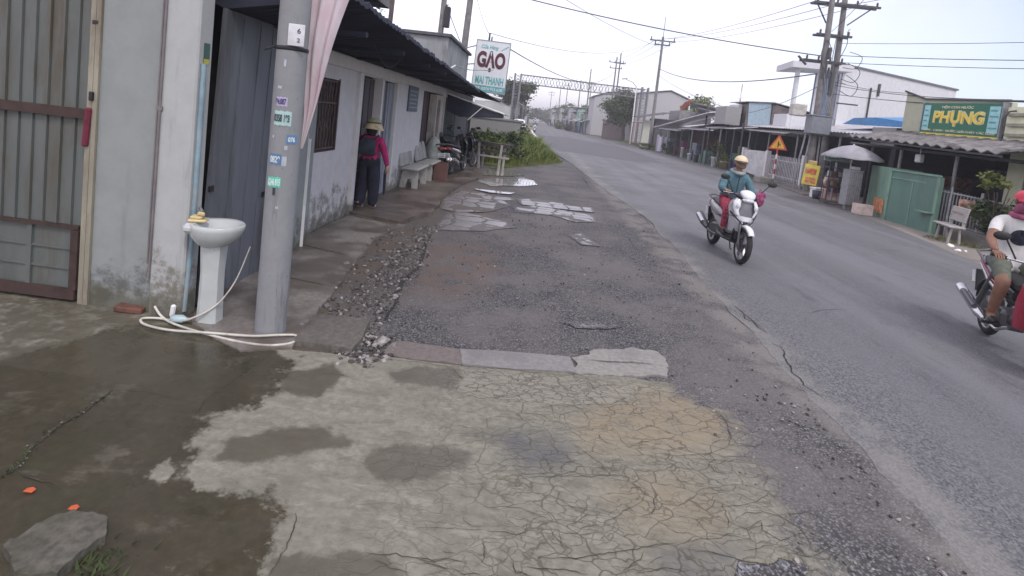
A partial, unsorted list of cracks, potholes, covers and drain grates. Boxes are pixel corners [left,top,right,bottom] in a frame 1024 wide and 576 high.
pothole [736,560,808,576]
crack [366,404,831,576]
crack [734,305,822,397]
crack [454,359,652,406]
